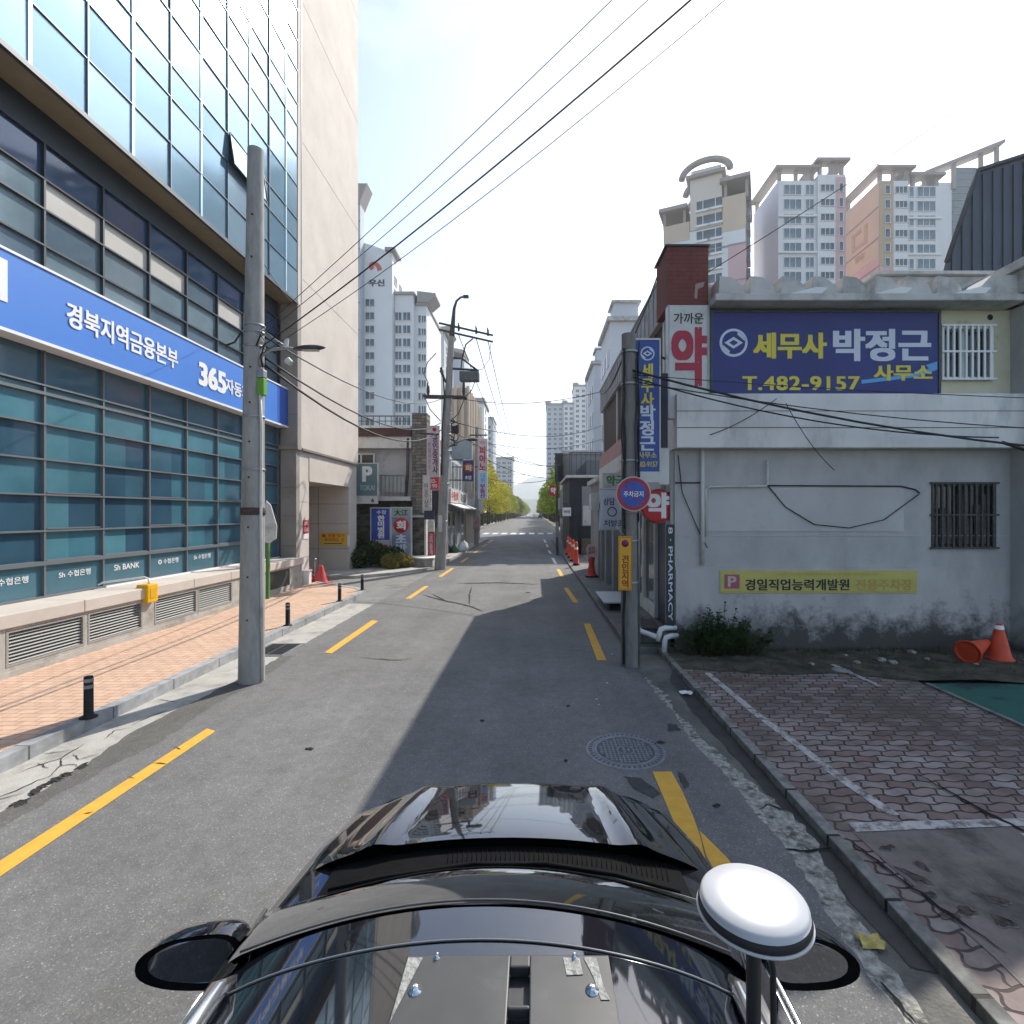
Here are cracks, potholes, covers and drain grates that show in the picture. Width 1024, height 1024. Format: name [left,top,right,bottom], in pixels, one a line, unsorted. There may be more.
manhole cover [586,733,666,770]
crack [0,743,89,799]
crack [422,582,530,611]
drain grate [265,643,305,656]
